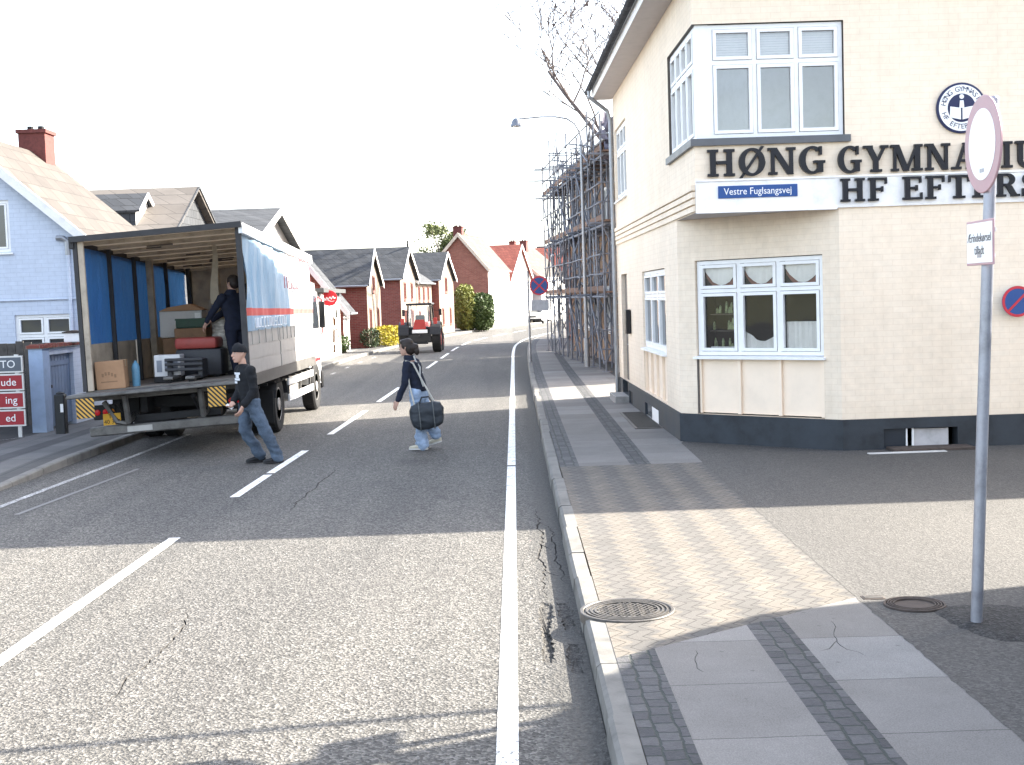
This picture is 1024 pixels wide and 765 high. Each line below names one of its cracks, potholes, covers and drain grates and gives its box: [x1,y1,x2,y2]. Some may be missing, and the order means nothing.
manhole cover [580,598,675,624]
manhole cover [883,596,946,613]
crack [106,608,190,705]
crack [535,509,565,598]
